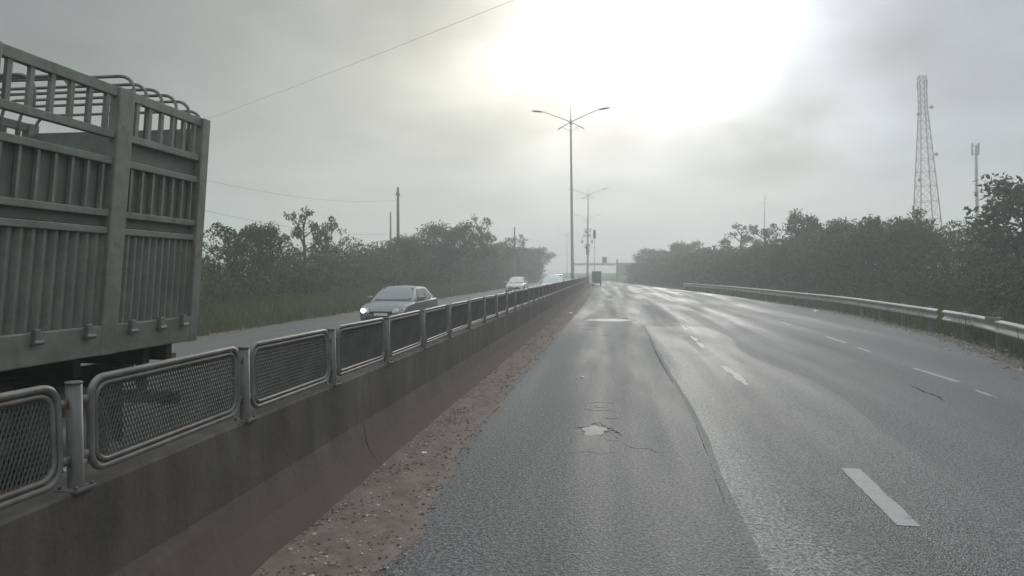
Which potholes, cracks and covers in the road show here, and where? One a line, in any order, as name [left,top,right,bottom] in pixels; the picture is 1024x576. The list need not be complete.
pothole [573,422,623,439]
